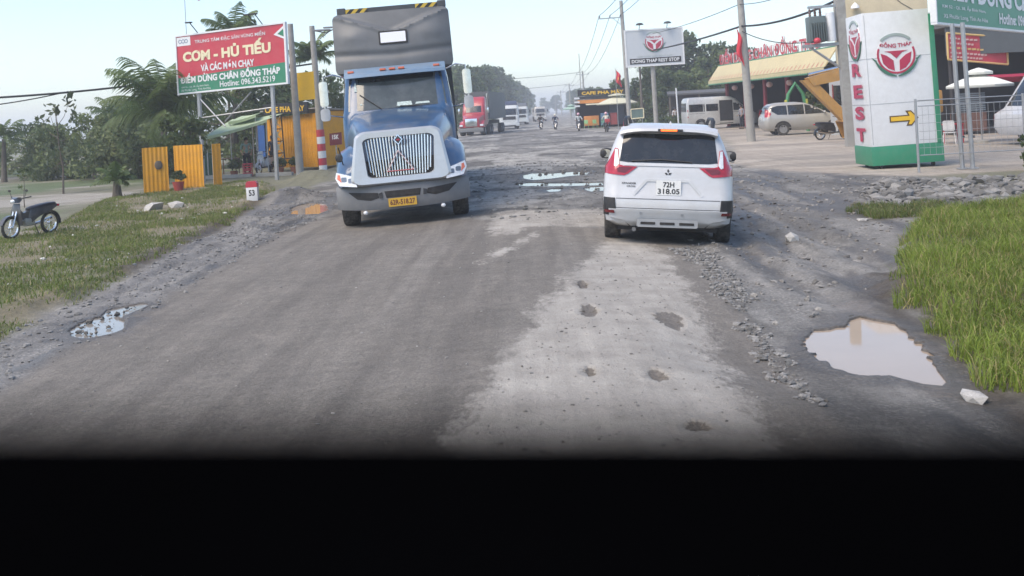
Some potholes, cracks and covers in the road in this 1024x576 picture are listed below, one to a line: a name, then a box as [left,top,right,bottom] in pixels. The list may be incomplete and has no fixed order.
pothole [59,301,154,341]
pothole [280,202,338,216]
pothole [788,315,959,390]
pothole [514,171,598,181]
